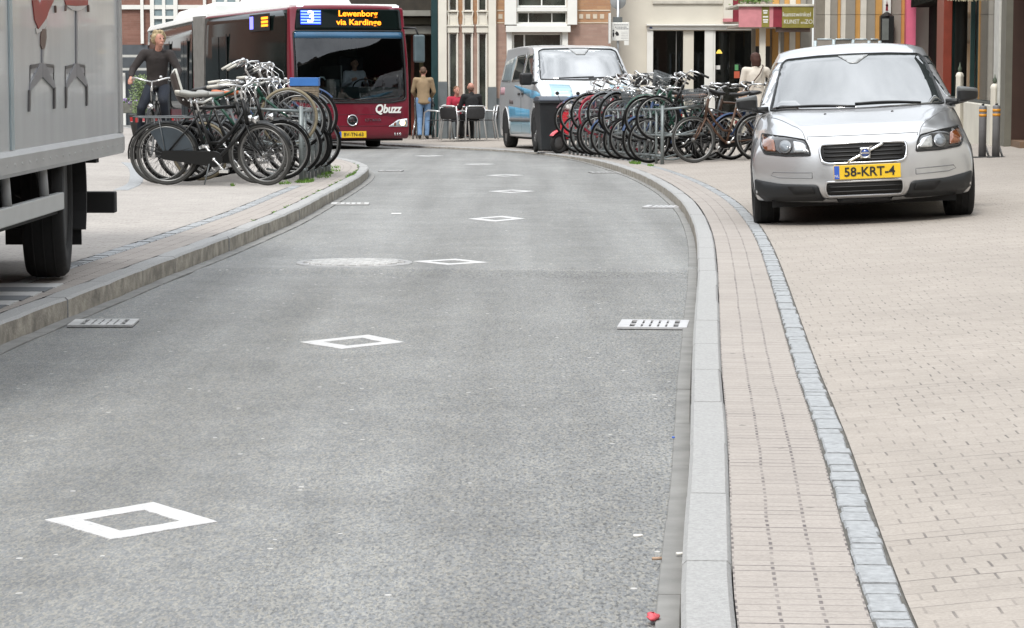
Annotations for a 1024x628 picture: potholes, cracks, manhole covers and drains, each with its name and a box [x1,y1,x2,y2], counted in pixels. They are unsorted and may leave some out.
drain grate [67,319,139,327]
drain grate [617,319,689,330]
manhole cover [296,258,413,267]
